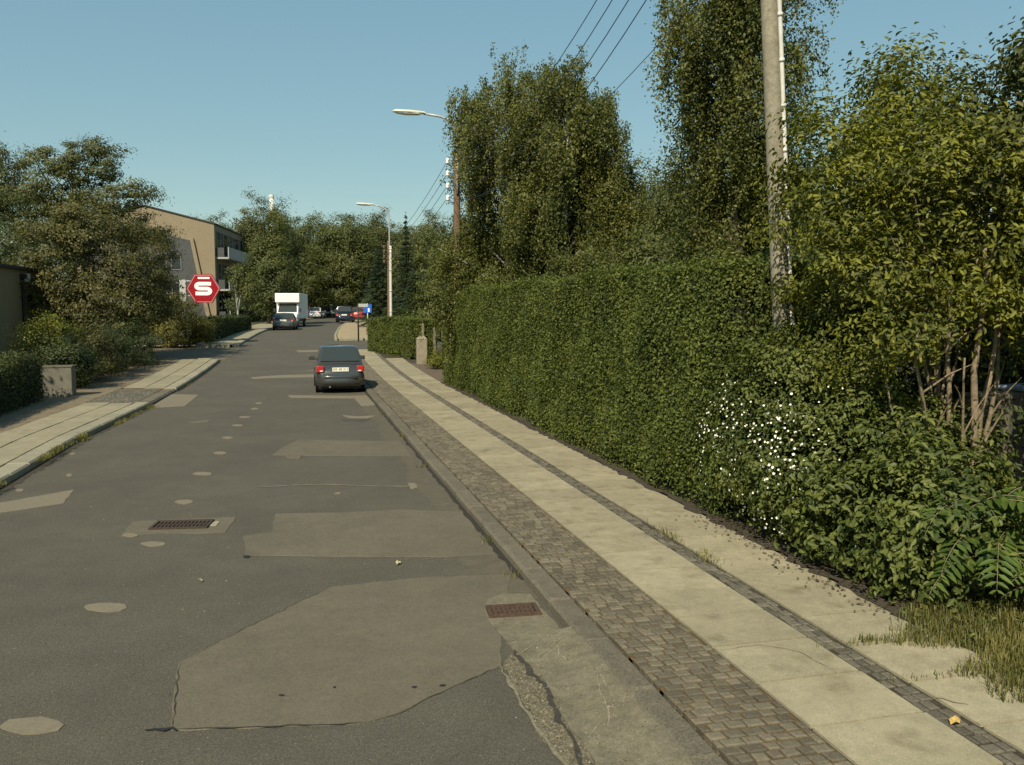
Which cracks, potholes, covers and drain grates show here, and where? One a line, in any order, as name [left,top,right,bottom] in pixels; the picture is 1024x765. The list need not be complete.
pothole [503,651,593,765]
crack [513,636,610,765]
drain grate [485,602,541,618]
